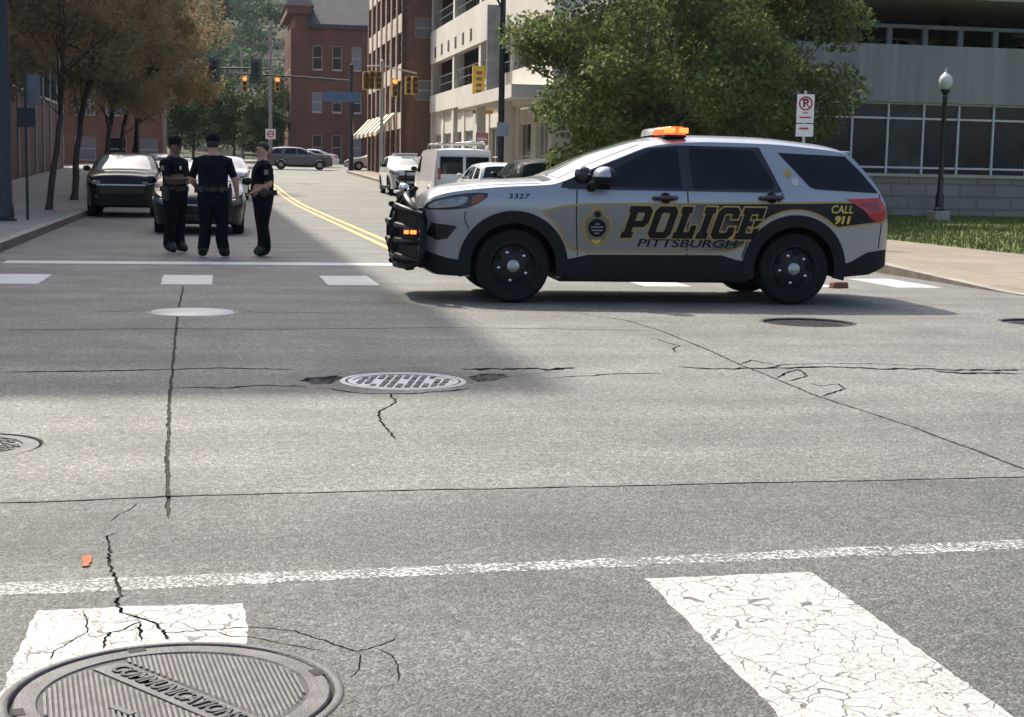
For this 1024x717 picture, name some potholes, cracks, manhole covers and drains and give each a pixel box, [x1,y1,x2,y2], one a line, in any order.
manhole cover [339,372,467,390]
manhole cover [760,318,857,327]
manhole cover [0,642,345,717]
pothole [299,375,344,384]
manhole cover [147,308,237,316]
crack [50,503,400,681]
pothole [469,373,513,382]
crack [37,311,1024,469]
manhole cover [0,433,44,456]
